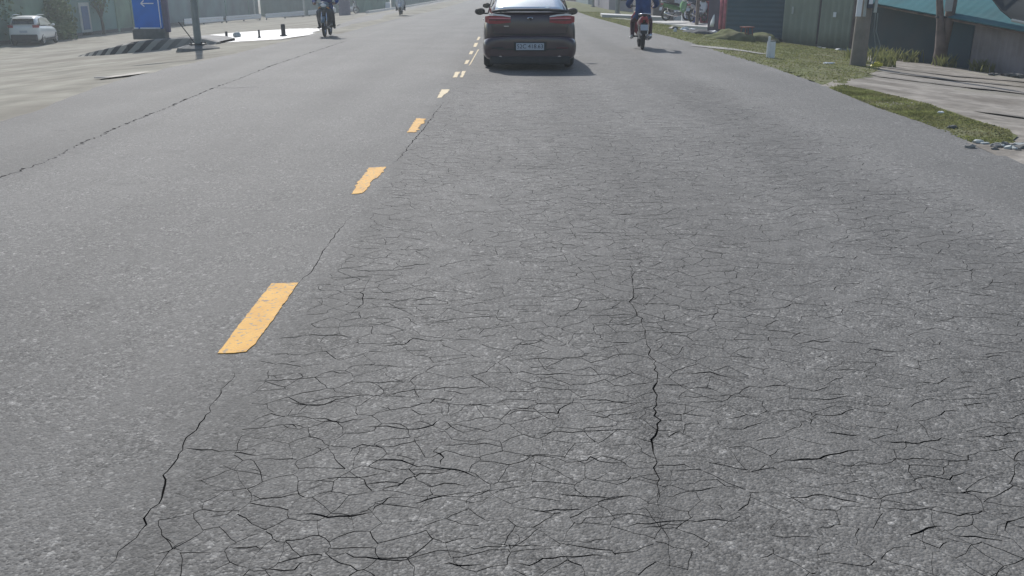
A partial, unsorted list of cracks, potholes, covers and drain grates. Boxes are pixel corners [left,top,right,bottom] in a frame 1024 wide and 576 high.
crack [0,43,339,178]
crack [98,80,1024,576]
